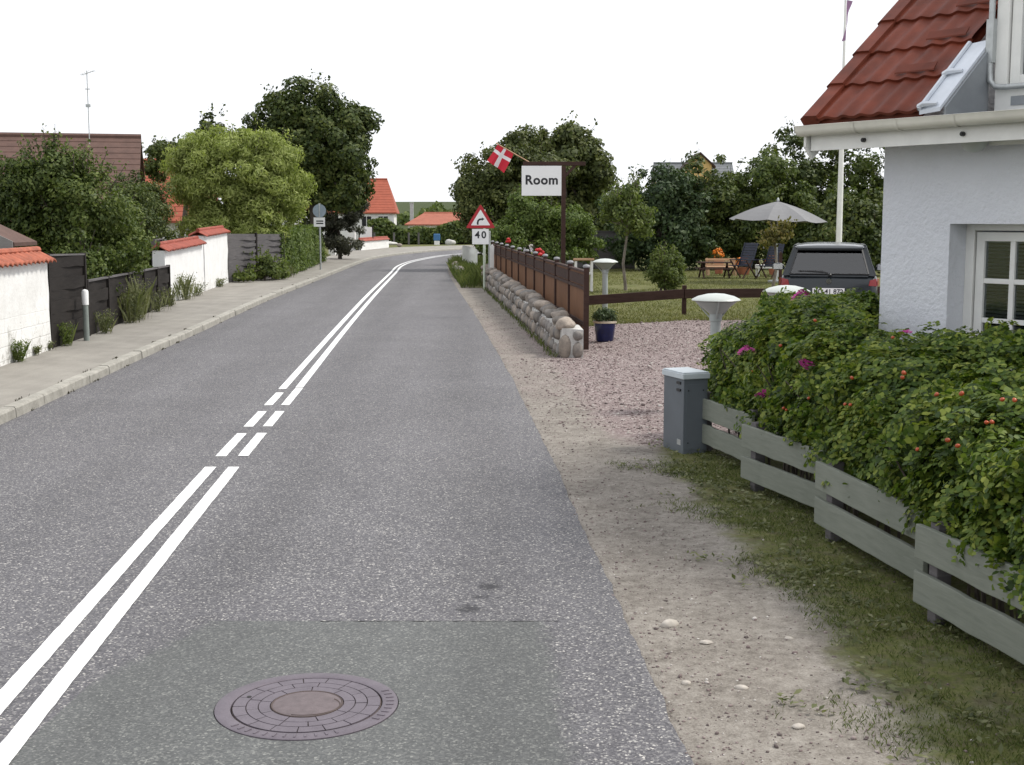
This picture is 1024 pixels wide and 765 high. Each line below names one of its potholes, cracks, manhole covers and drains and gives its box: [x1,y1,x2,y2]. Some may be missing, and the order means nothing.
manhole cover [214,673,398,741]
